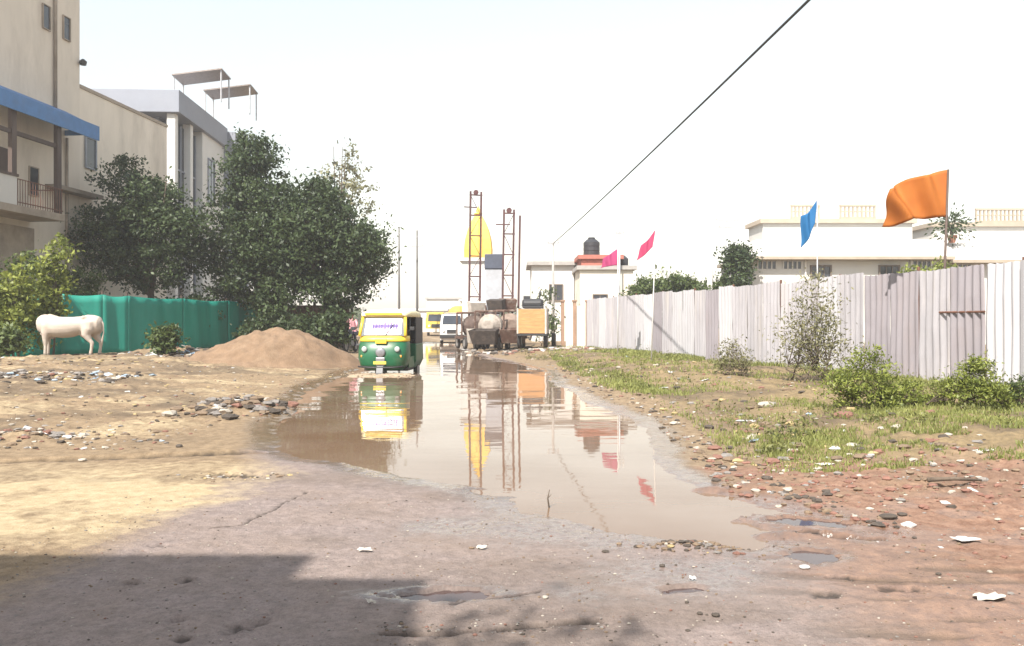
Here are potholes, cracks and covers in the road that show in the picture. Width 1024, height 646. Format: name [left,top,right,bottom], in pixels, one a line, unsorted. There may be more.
pothole [748,514,881,528]
pothole [648,582,725,594]
pothole [241,342,831,552]
crack [208,491,310,529]
pothole [373,584,506,603]
pothole [770,546,854,565]
